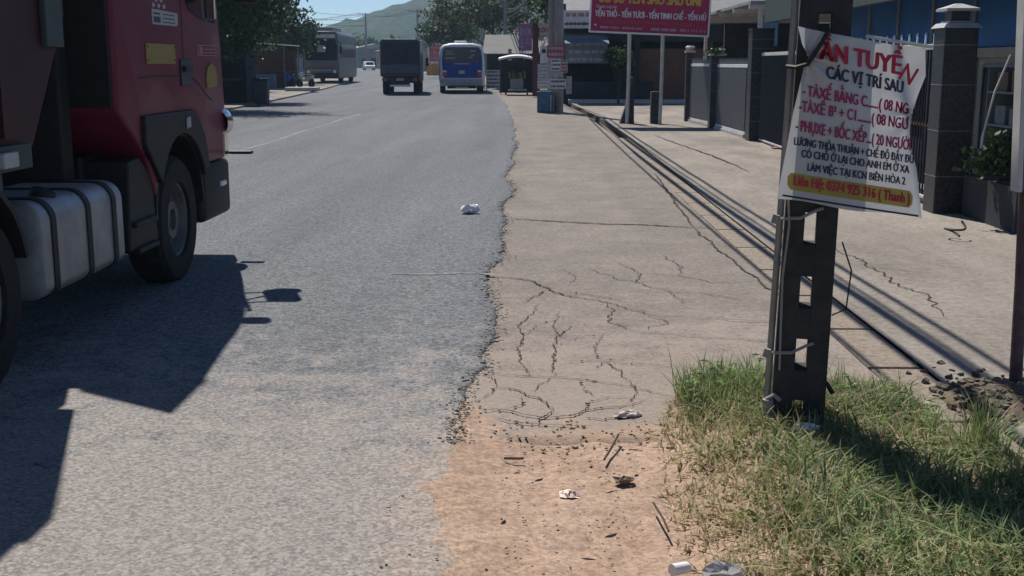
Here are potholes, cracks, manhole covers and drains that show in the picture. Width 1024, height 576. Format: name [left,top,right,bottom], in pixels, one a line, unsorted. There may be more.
crack [836,248,945,317]
crack [469,172,779,428]
crack [655,135,750,172]
